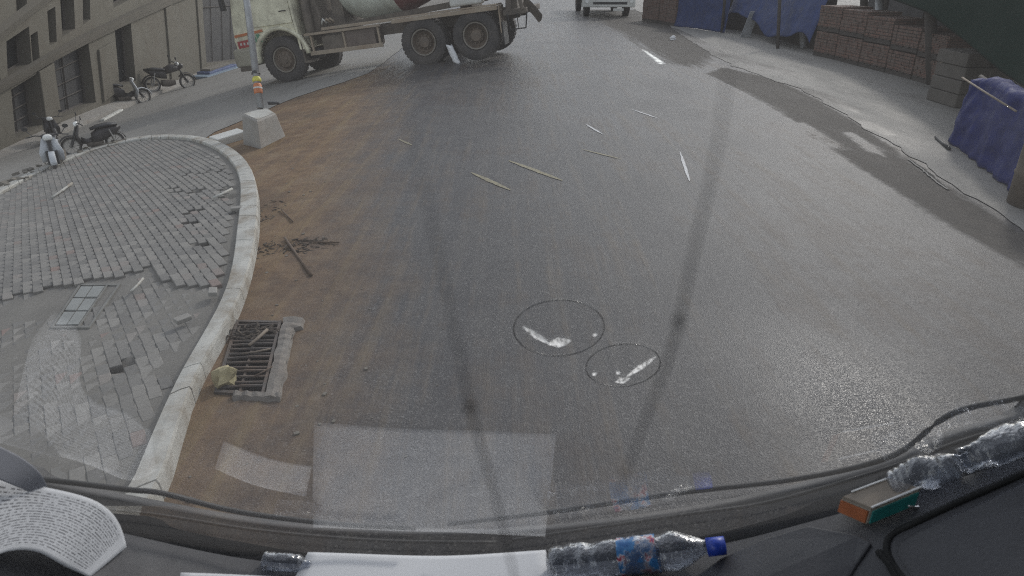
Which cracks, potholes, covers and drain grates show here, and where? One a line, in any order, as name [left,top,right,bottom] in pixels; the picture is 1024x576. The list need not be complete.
crack [908,159,949,189]
drain grate [214,316,305,402]
manhole cover [50,283,121,329]
